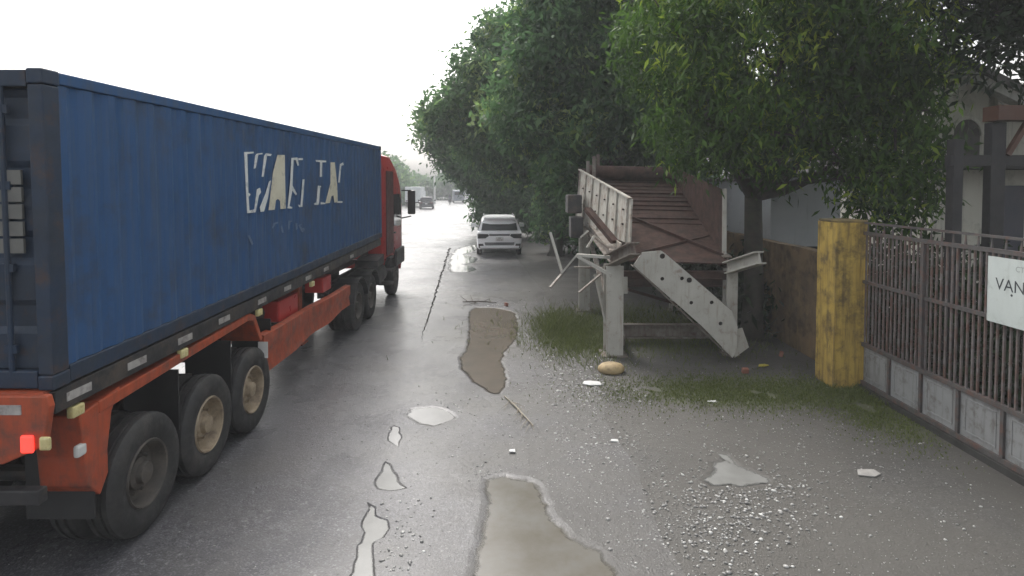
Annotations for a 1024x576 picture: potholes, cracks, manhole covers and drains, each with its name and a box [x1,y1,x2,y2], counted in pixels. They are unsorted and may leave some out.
pothole [349,502,390,576]
pothole [373,461,407,491]
pothole [700,451,774,489]
pothole [403,406,459,427]
pothole [457,307,521,394]
crack [422,249,451,336]
pothole [463,472,626,576]
pothole [387,425,403,447]
